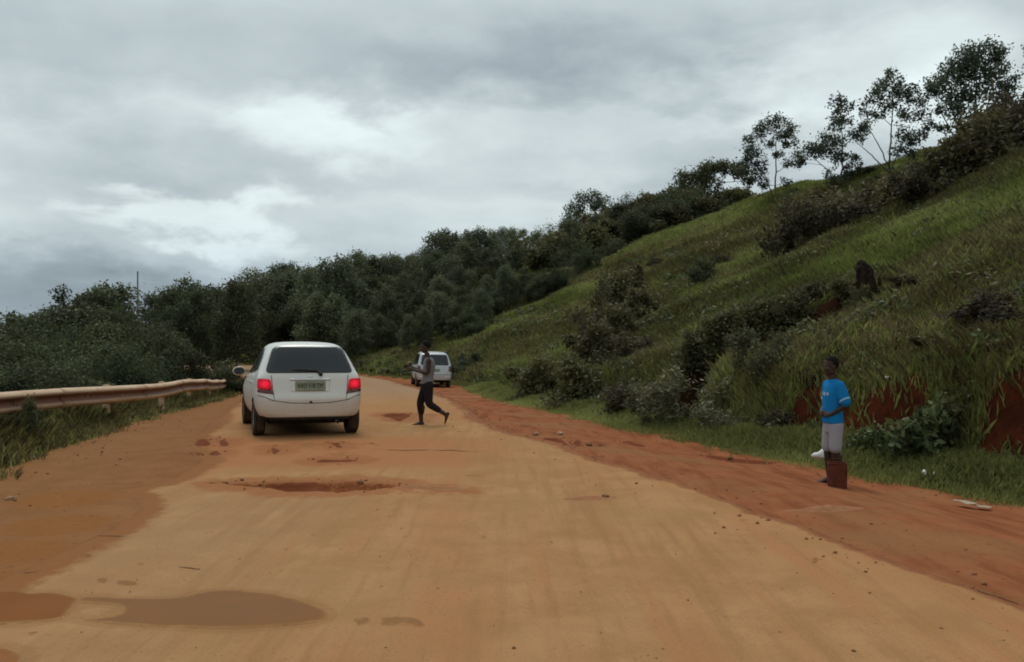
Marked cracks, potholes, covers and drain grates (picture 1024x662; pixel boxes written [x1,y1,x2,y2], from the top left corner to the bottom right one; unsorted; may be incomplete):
pothole [222,480,398,493]
pothole [380,413,412,421]
pothole [193,438,213,447]
